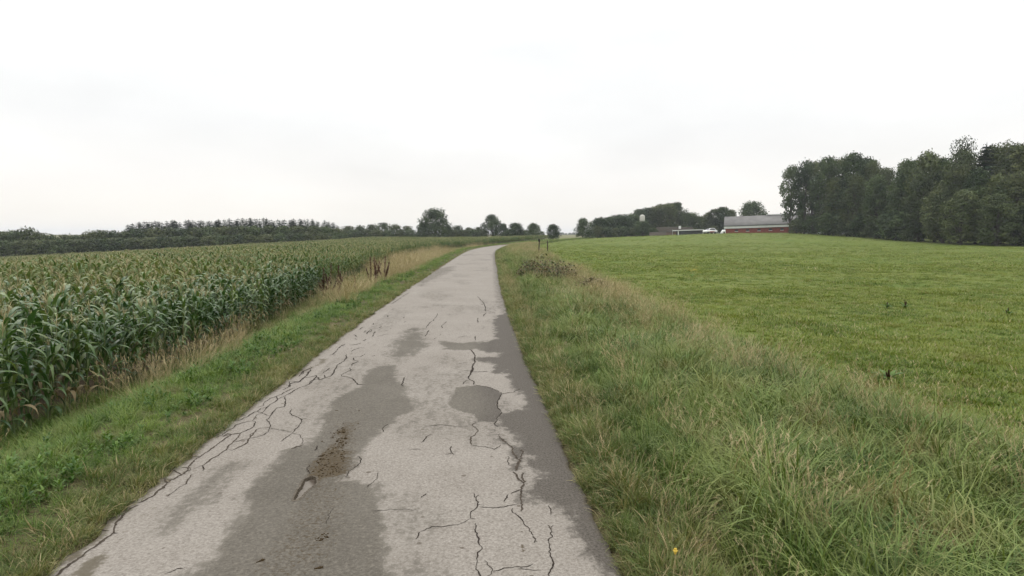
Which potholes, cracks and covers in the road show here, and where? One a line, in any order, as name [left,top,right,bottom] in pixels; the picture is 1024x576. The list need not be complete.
pothole [291,475,319,502]
crack [409,296,555,576]
crack [56,293,408,576]
